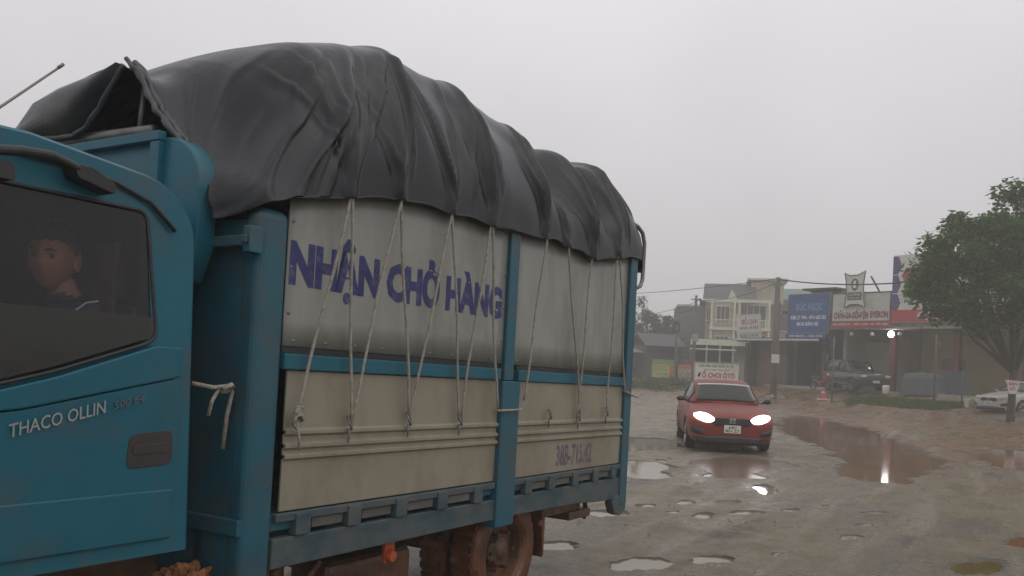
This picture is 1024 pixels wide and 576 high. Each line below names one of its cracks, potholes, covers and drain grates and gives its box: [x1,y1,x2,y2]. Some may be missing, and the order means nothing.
pothole [752,483,779,495]
pothole [688,555,736,564]
pothole [945,557,1011,575]
pothole [686,455,804,479]
pothole [627,457,684,480]
pothole [608,556,676,571]
pothole [966,447,1024,470]
pothole [628,437,687,452]
pothole [690,511,715,519]
pothole [543,540,580,550]
pothole [1001,536,1024,548]
pothole [772,415,961,484]
